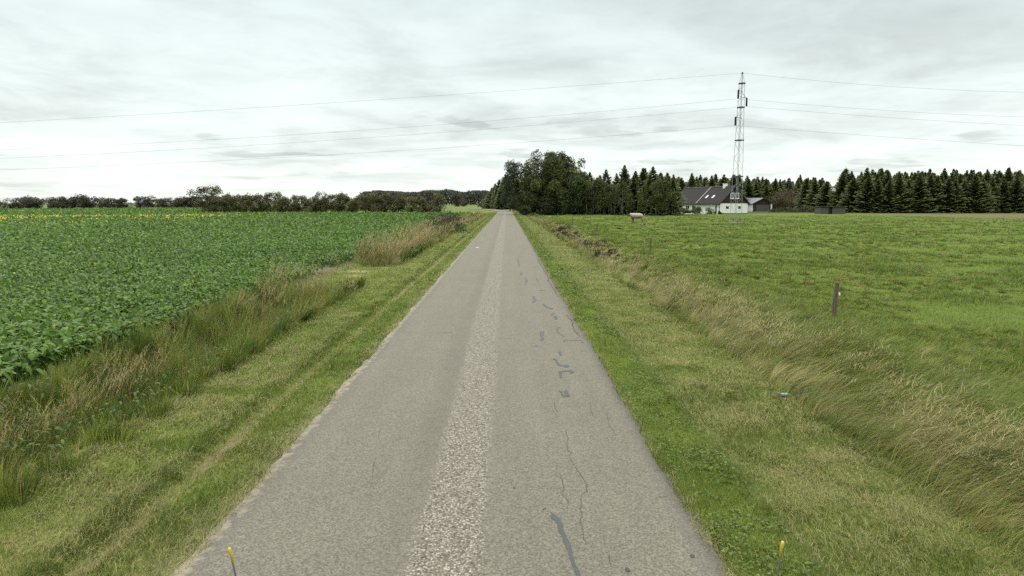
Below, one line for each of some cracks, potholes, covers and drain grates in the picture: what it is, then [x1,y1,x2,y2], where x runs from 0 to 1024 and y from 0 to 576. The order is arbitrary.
crack [560,433,587,544]
